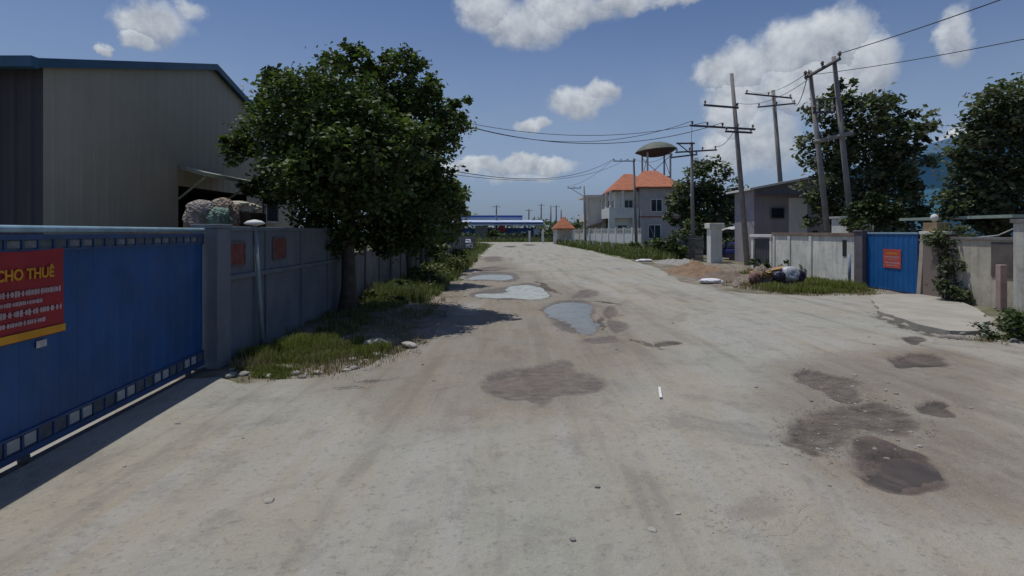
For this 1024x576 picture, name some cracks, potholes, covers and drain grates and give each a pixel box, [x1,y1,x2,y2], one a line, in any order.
pothole [460,271,524,282]
pothole [834,432,970,503]
pothole [464,282,557,301]
pothole [534,299,608,337]
crack [865,311,1001,342]
